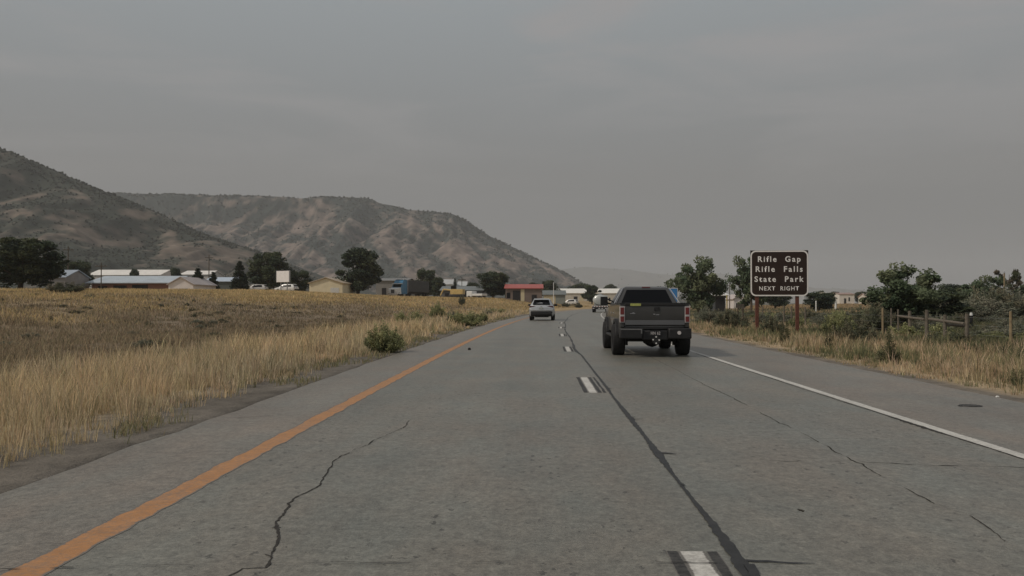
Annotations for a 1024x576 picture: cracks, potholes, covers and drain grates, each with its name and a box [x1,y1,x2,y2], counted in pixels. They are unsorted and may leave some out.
crack [1,423,717,576]
crack [653,354,1024,541]
